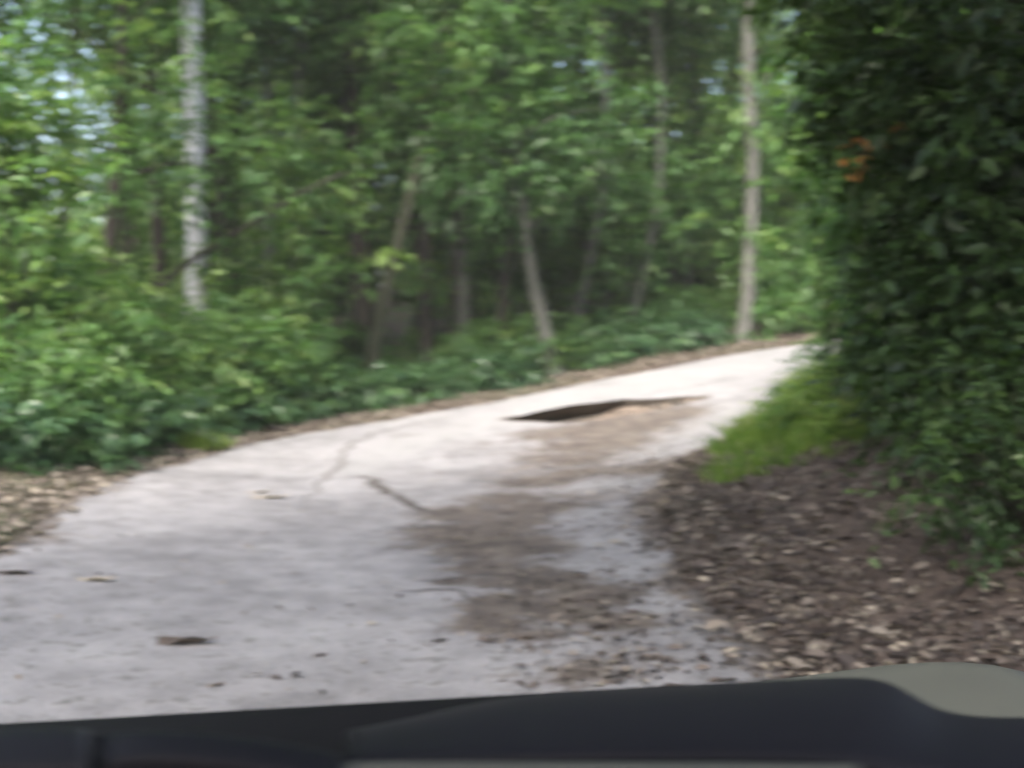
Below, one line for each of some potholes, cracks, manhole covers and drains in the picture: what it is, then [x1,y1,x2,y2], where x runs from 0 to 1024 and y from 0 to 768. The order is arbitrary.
crack [304,415,460,518]
pothole [505,396,705,422]
